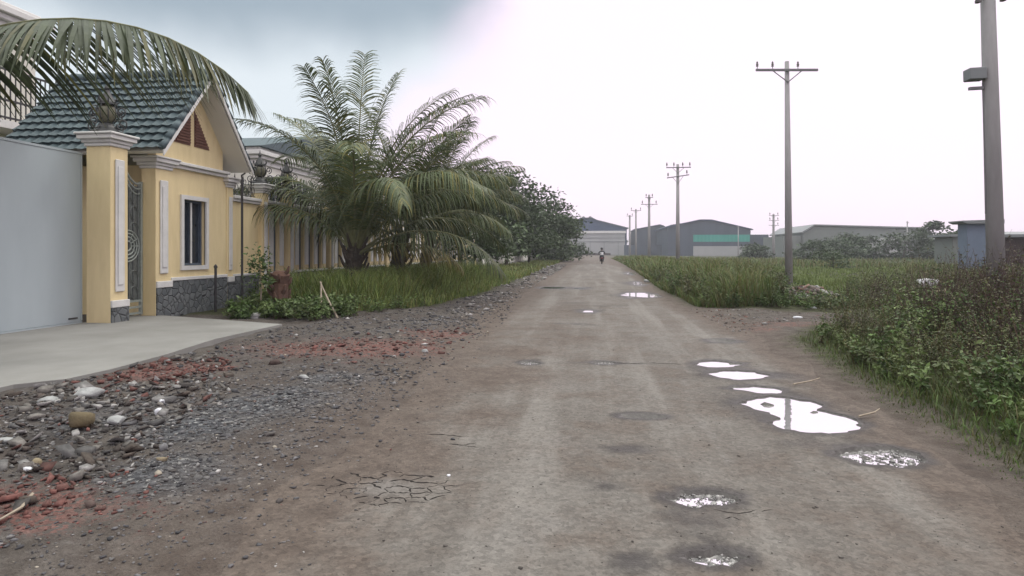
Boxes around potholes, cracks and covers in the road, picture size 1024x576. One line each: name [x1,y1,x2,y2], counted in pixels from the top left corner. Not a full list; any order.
pothole [728,385,784,393]
pothole [708,370,770,380]
pothole [738,395,863,433]
pothole [832,445,928,467]
pothole [680,547,749,567]
pothole [662,489,742,508]
